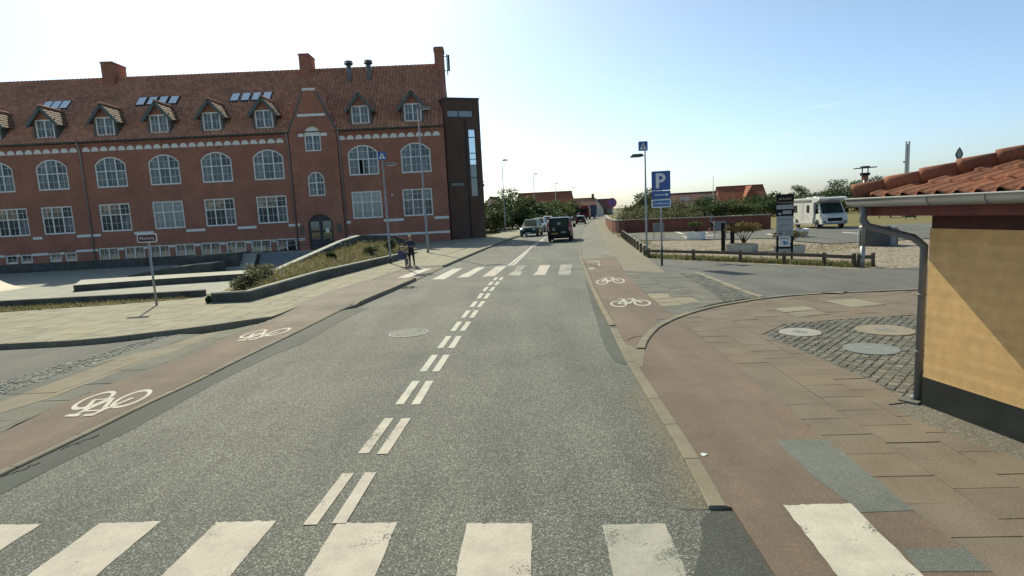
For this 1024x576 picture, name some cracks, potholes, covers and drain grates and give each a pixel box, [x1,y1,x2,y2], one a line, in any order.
manhole cover [388,329,429,338]
manhole cover [779,328,822,337]
manhole cover [855,325,916,336]
manhole cover [842,343,901,356]
